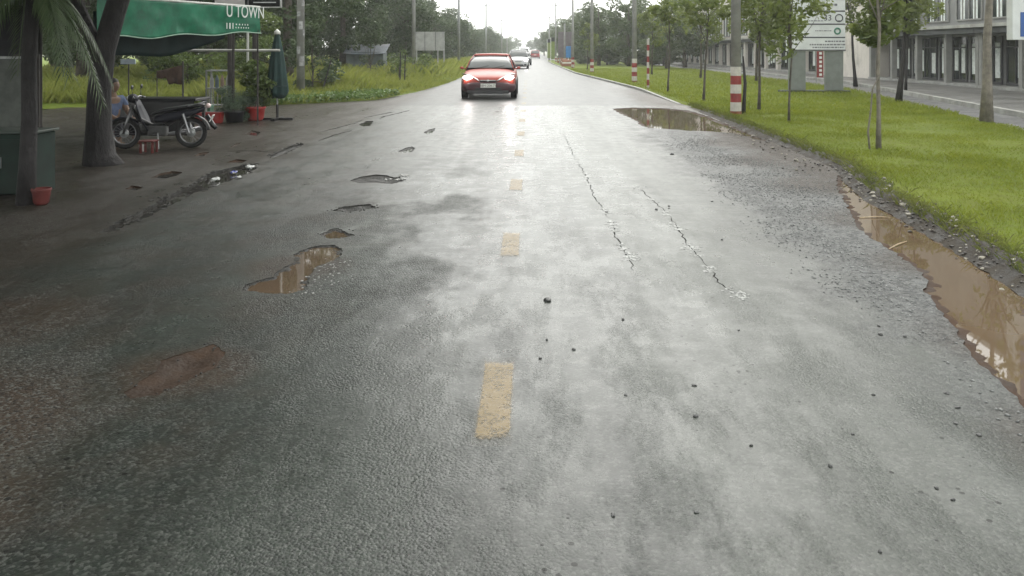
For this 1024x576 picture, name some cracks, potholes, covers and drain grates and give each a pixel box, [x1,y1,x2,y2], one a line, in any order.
pothole [327,204,379,213]
crack [633,185,750,300]
pothole [317,226,361,239]
pothole [351,174,409,184]
pothole [243,245,367,299]
pothole [96,162,259,233]
crack [561,134,641,270]
